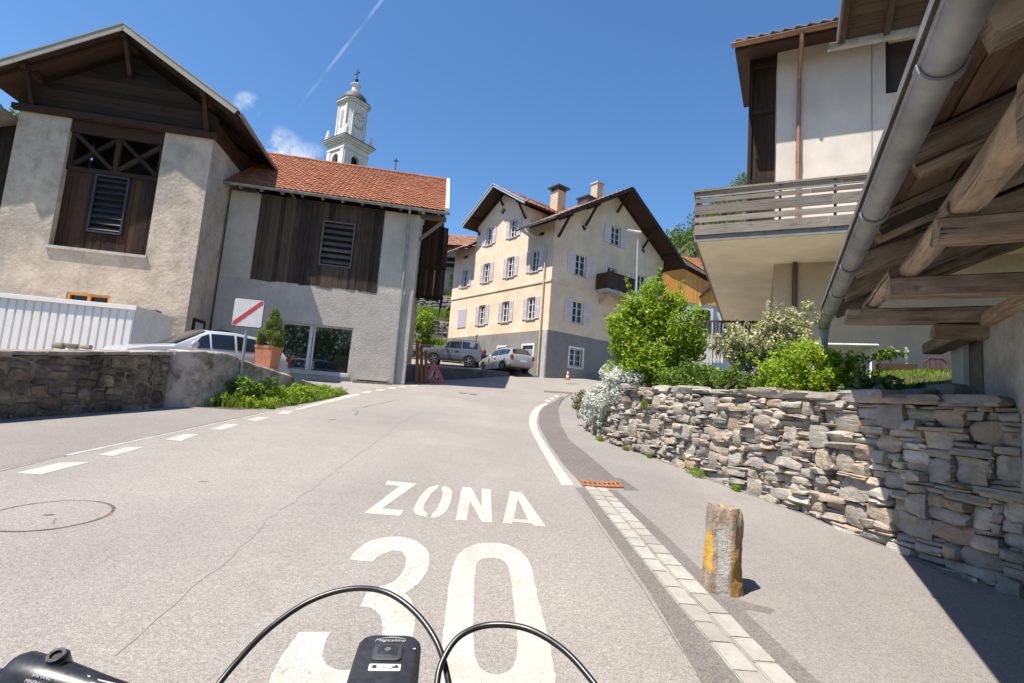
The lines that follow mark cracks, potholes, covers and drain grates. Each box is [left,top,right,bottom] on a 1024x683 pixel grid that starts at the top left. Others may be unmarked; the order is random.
manhole cover [0,500,115,532]
drain grate [580,479,624,488]
